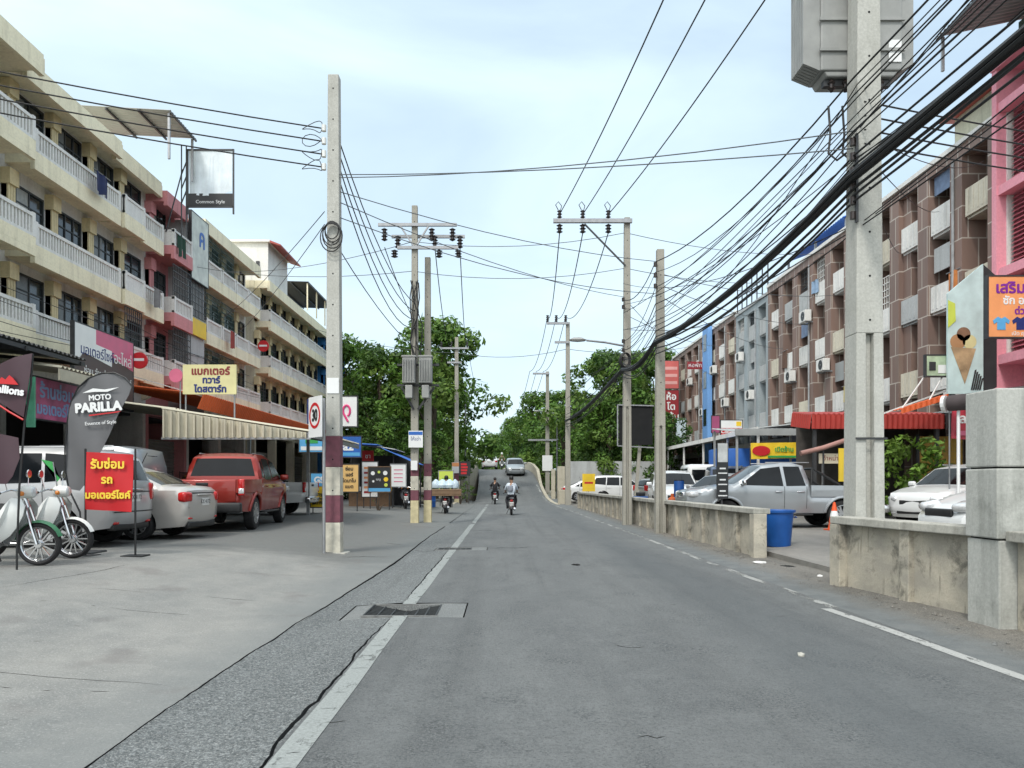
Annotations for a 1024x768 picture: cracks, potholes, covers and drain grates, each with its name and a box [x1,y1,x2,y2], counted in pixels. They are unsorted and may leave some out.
drain grate [340,603,467,646]
crack [260,620,389,768]
